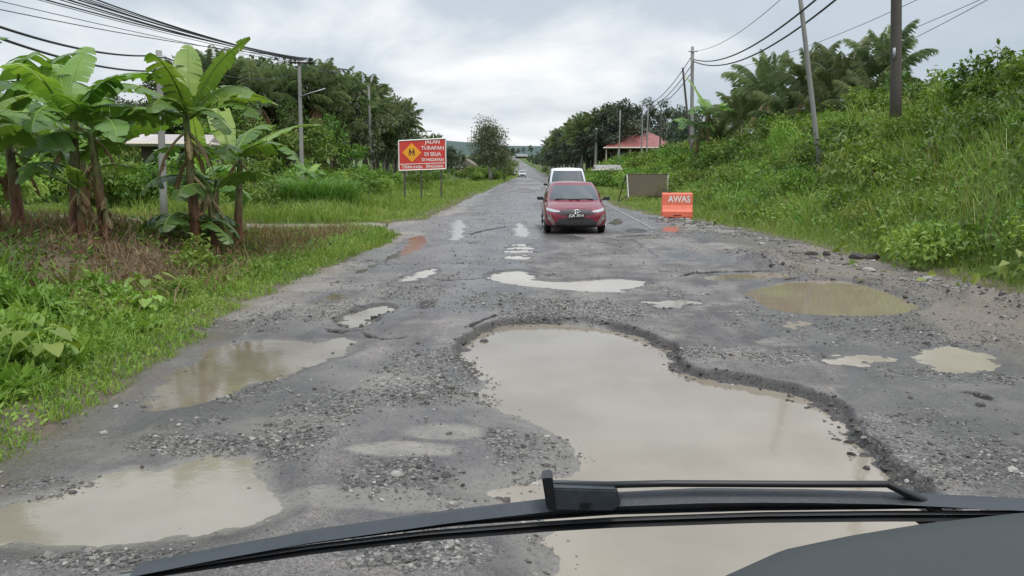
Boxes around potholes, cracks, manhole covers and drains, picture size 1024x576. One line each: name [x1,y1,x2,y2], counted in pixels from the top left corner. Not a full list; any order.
pothole [633,297,710,309]
pothole [397,315,968,576]
pothole [328,301,402,329]
pothole [386,266,444,283]
pothole [887,340,1024,377]
pothole [116,332,375,414]
pothole [732,275,937,317]
pothole [0,438,328,568]
pothole [478,268,658,293]
crack [467,227,508,235]
